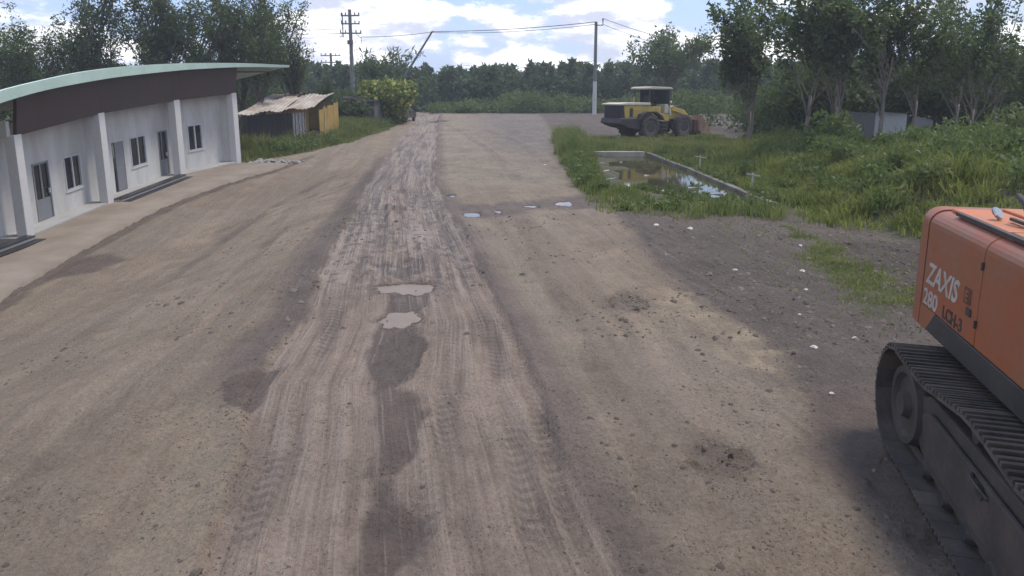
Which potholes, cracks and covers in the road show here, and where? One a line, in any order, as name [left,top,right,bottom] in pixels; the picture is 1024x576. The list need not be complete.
pothole [682,440,769,480]
pothole [372,311,426,330]
pothole [366,281,443,297]
pothole [366,327,434,389]
